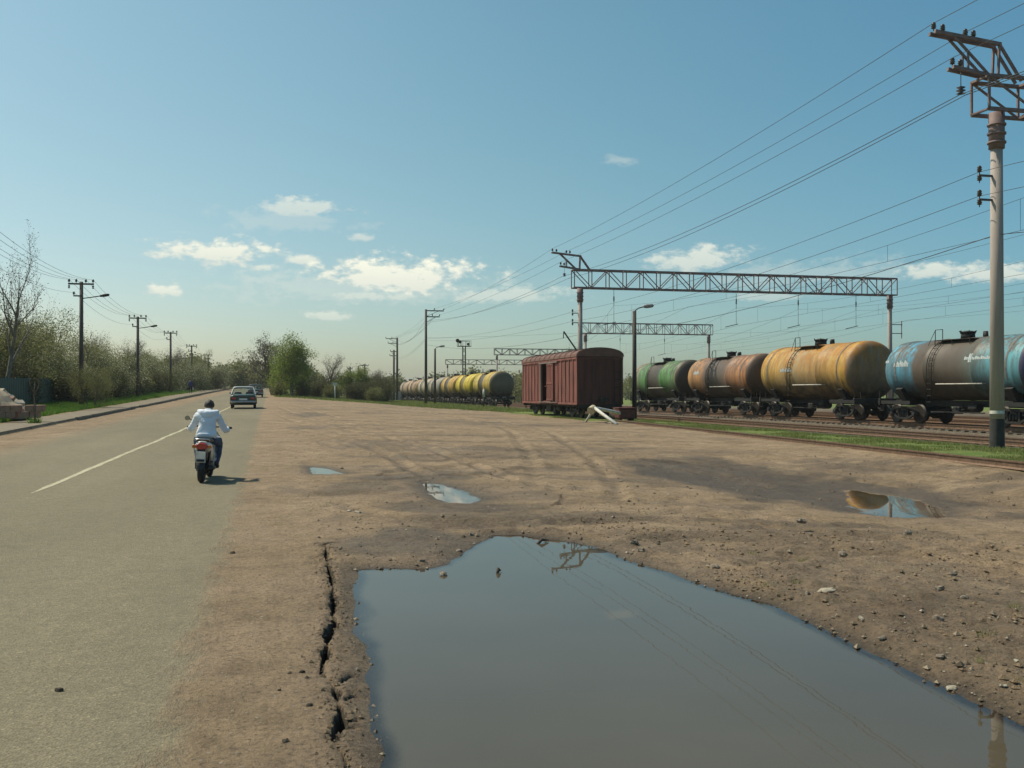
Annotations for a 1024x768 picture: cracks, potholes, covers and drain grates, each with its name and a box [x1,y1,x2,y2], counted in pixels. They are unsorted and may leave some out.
pothole [412,480,491,504]
pothole [304,466,351,474]
crack [319,542,356,768]
pothole [832,488,958,518]
